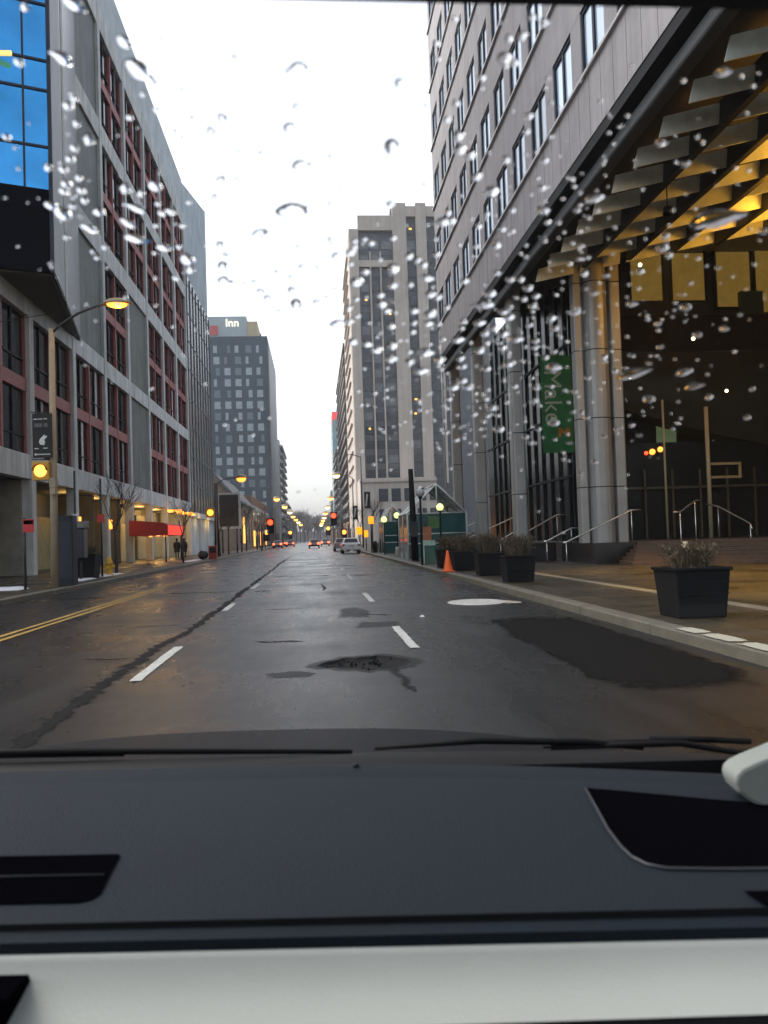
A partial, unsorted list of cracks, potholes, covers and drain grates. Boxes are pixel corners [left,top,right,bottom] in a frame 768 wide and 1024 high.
pothole [318,655,412,671]
